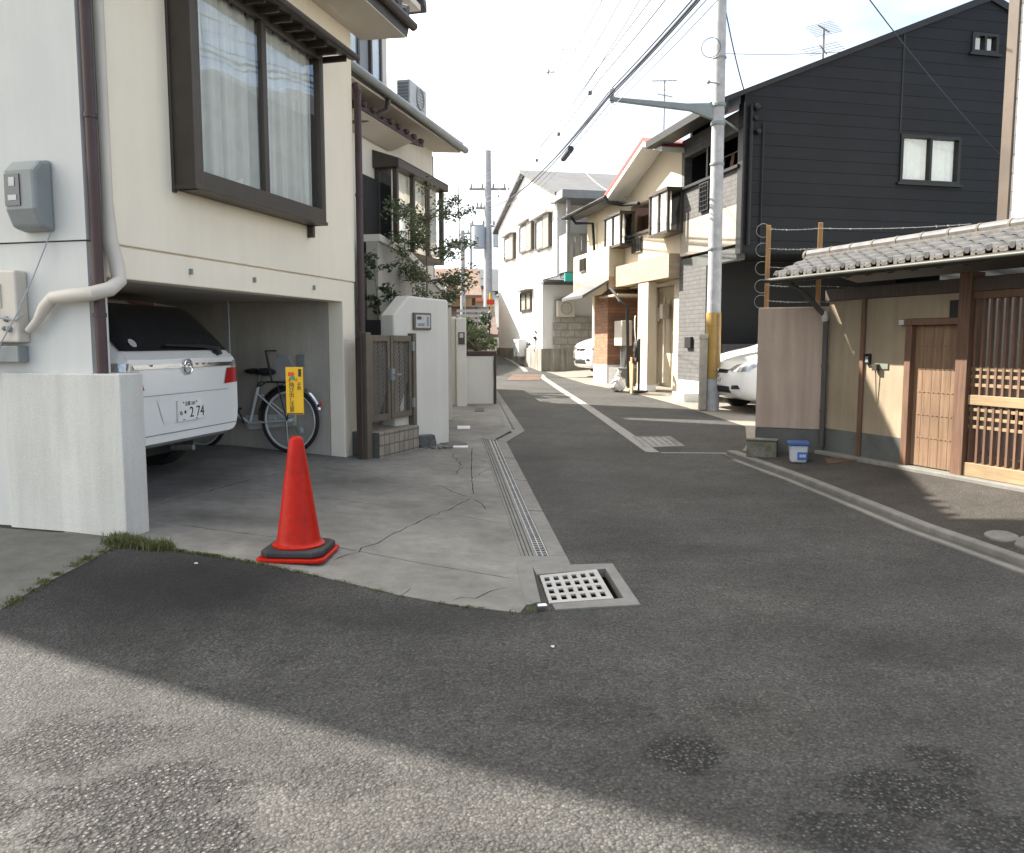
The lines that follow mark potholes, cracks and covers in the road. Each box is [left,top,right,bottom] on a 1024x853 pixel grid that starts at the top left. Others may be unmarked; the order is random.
crack [335,458,486,560]
drain grate [632,436,685,448]
manhole cover [984,530,1020,543]
